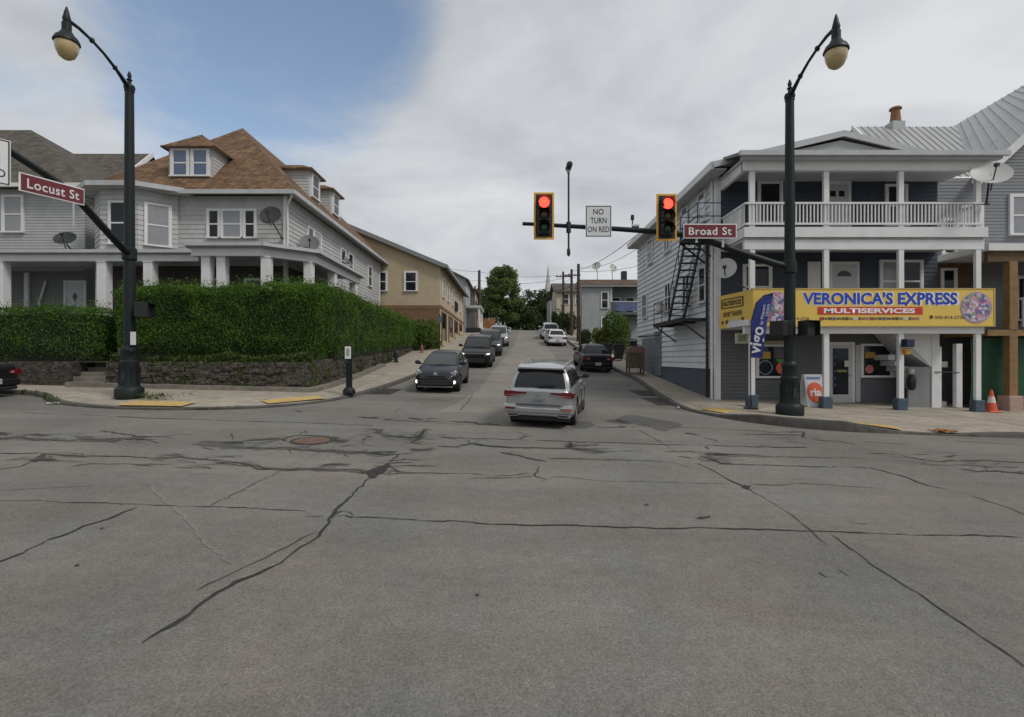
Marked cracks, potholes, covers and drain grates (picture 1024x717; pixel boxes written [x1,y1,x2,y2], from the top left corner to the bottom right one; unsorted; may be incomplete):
manhole cover [289,436,335,445]
crack [0,394,1024,666]
